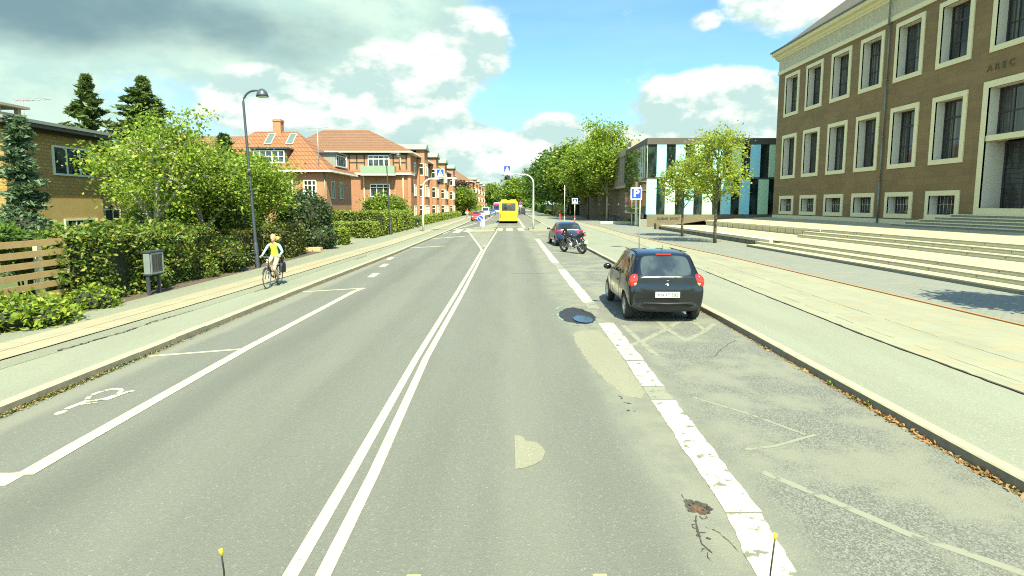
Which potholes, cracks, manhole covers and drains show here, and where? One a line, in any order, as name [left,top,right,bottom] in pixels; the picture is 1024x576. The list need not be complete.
crack [683,497,735,559]
pothole [683,499,713,515]
